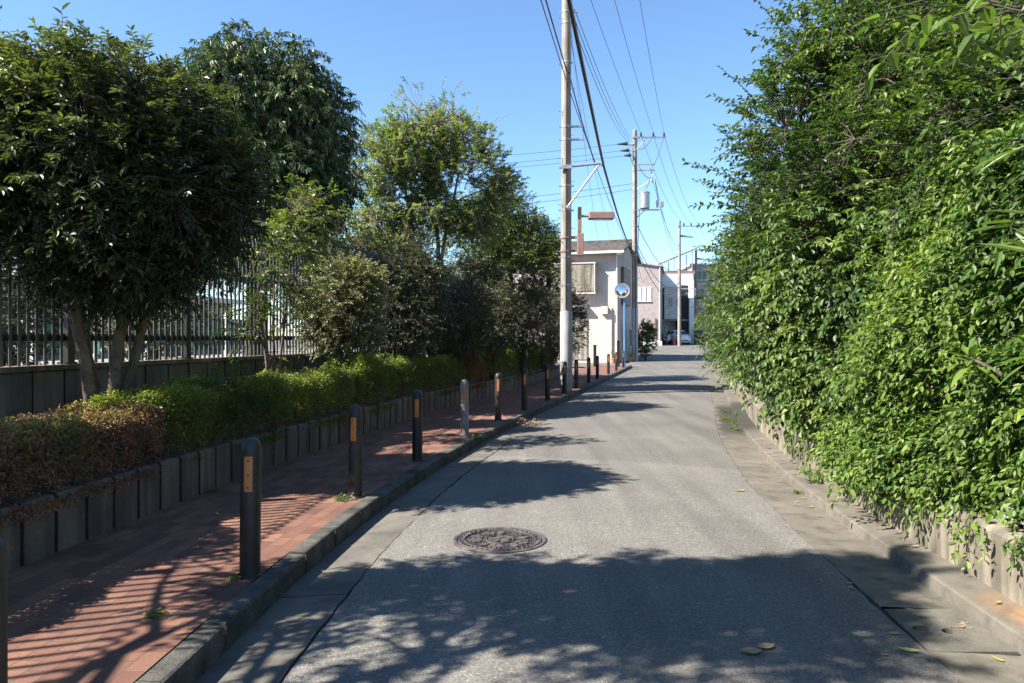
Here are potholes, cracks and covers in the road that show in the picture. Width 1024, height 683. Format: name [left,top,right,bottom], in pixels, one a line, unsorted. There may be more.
manhole cover [453,527,547,554]
